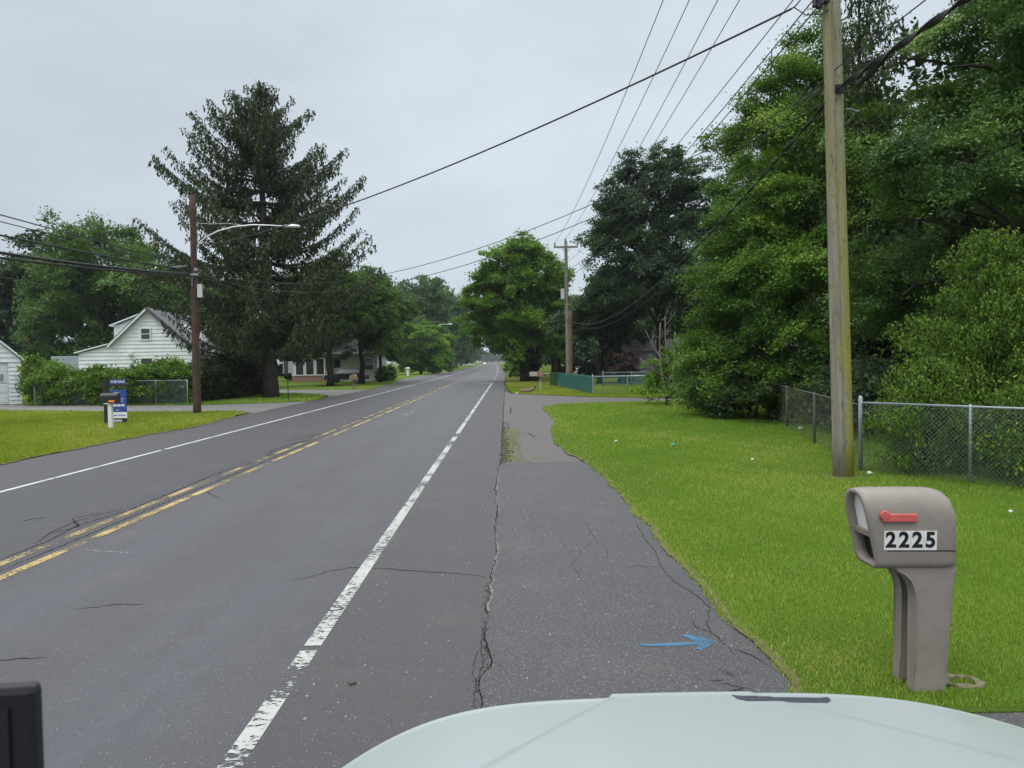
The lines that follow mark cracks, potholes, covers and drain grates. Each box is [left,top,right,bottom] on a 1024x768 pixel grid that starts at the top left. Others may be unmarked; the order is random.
crack [293,393,535,708]
crack [625,520,769,692]
